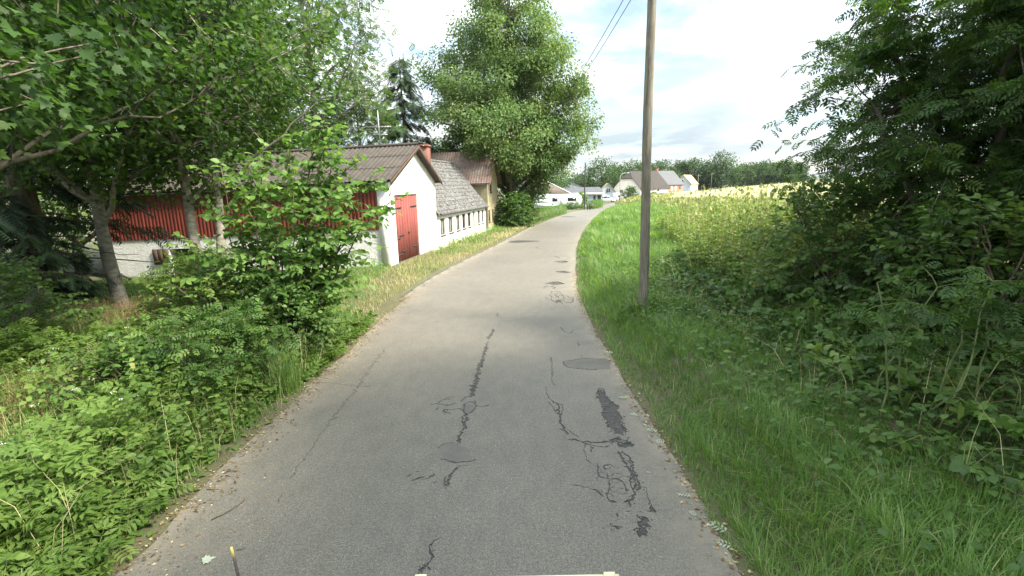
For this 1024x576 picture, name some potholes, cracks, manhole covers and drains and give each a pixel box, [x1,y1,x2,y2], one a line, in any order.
crack [277,349,384,504]
crack [544,284,574,304]
crack [418,538,439,574]
crack [545,327,657,518]
crack [407,313,499,491]
